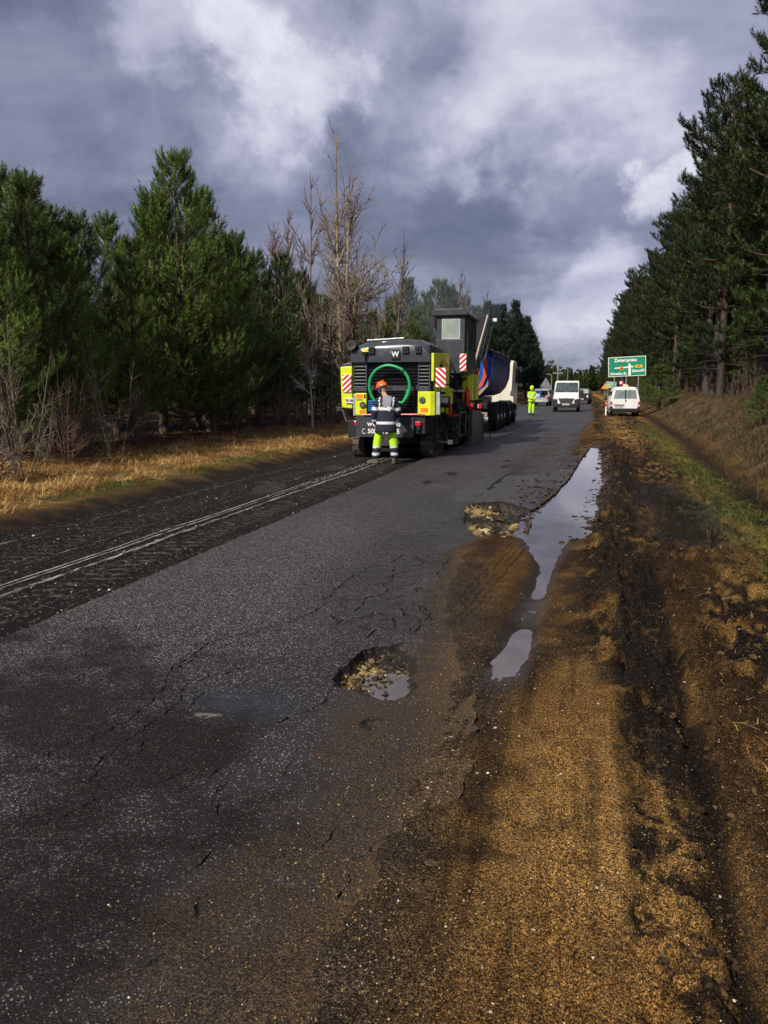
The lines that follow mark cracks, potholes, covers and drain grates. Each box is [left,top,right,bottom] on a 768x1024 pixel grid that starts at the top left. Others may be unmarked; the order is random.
crack [0,532,450,832]
pothole [462,501,532,535]
crack [154,737,264,868]
crack [337,848,372,900]
pothole [332,642,429,702]
pothole [359,717,388,732]
